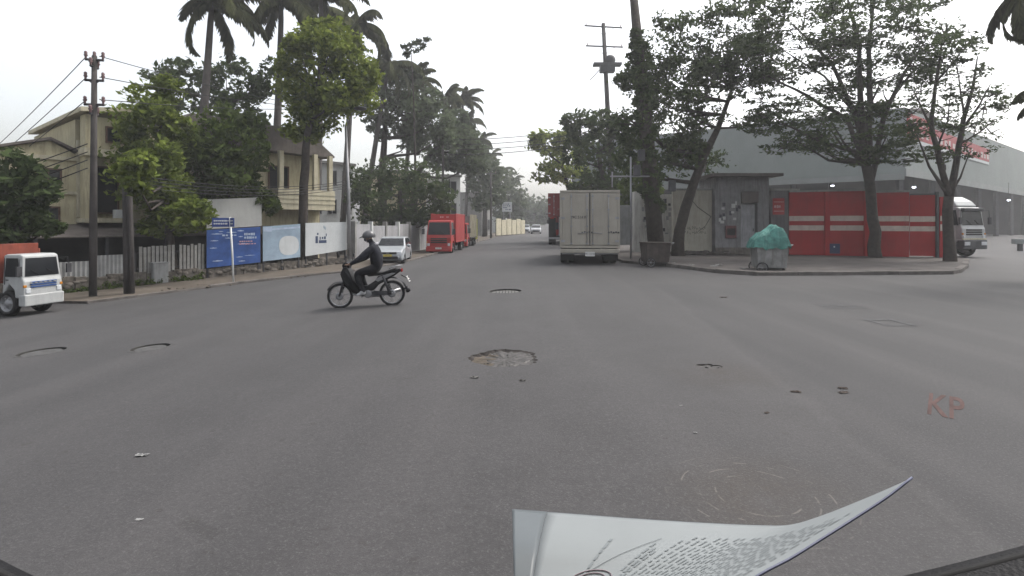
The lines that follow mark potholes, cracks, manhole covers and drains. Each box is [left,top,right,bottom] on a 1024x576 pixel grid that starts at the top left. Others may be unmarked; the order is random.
pothole [468,349,538,367]
